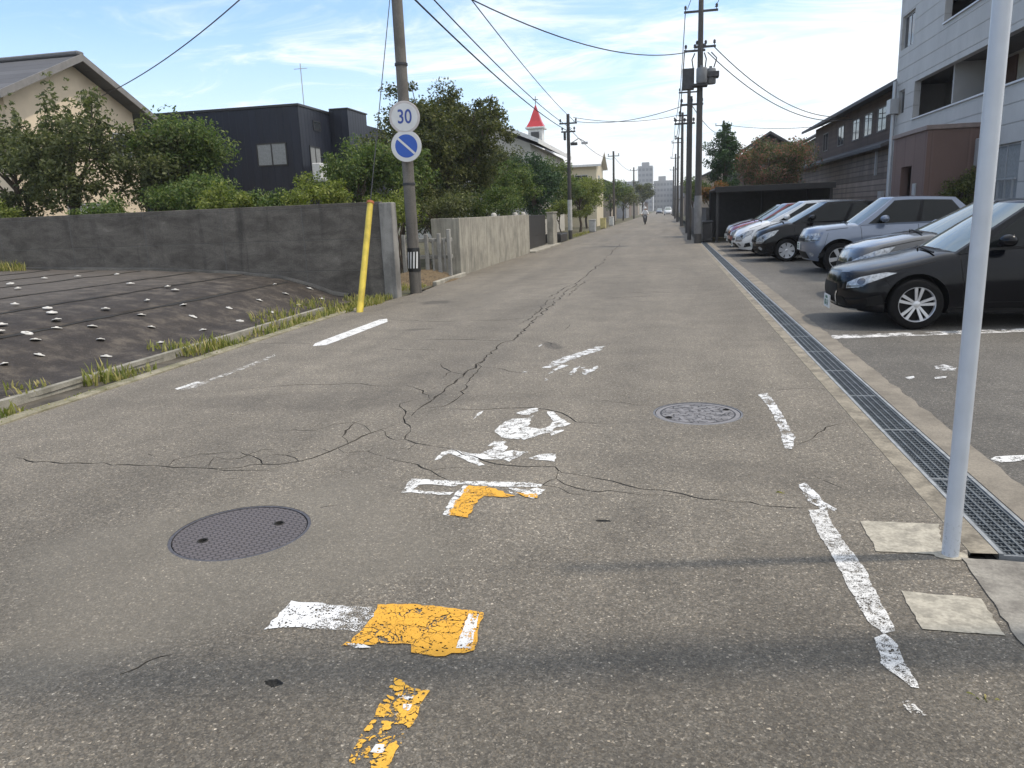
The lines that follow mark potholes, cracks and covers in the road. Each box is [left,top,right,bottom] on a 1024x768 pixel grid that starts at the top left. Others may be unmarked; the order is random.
drain grate [778,323,811,336]
drain grate [823,370,879,396]
crack [120,654,172,675]
drain grate [879,428,974,480]
crack [21,243,795,508]
drain grate [790,335,829,351]
drain grate [847,394,917,430]
drain grate [926,477,1024,562]
manhole cover [653,402,743,425]
drain grate [769,313,797,324]
drain grate [805,351,851,371]
pothole [264,679,283,687]
